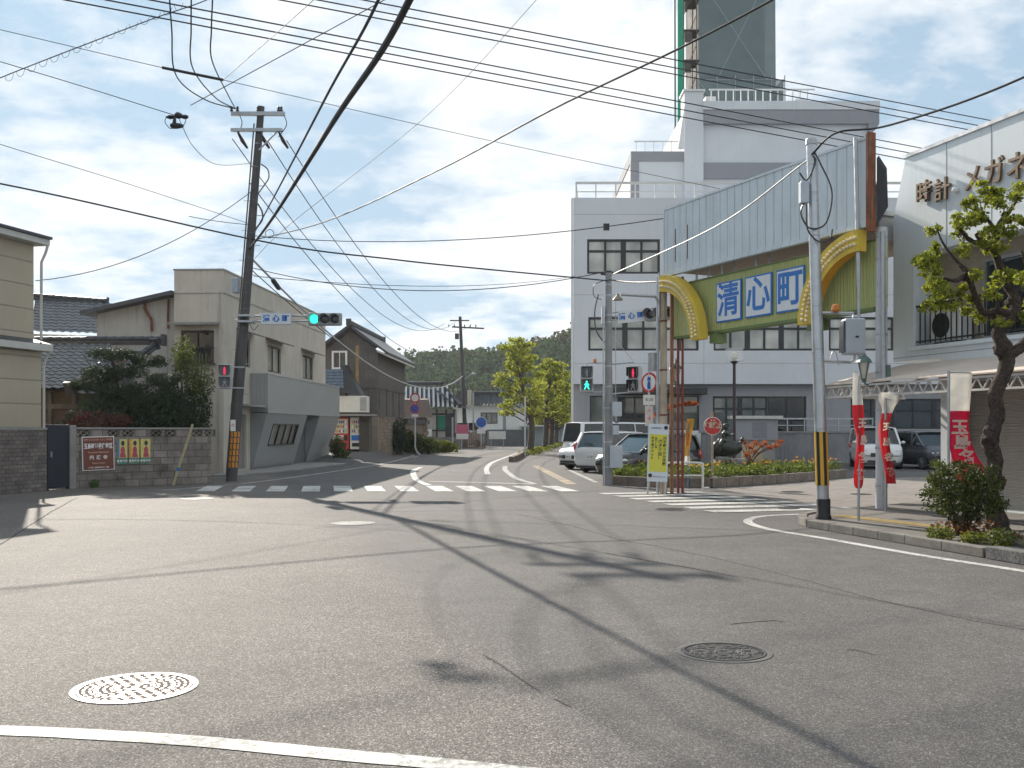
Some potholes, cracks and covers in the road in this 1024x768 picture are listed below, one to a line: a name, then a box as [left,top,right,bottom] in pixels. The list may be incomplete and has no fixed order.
manhole cover [676,642,773,663]
crack [482,654,571,707]
manhole cover [69,672,198,705]
